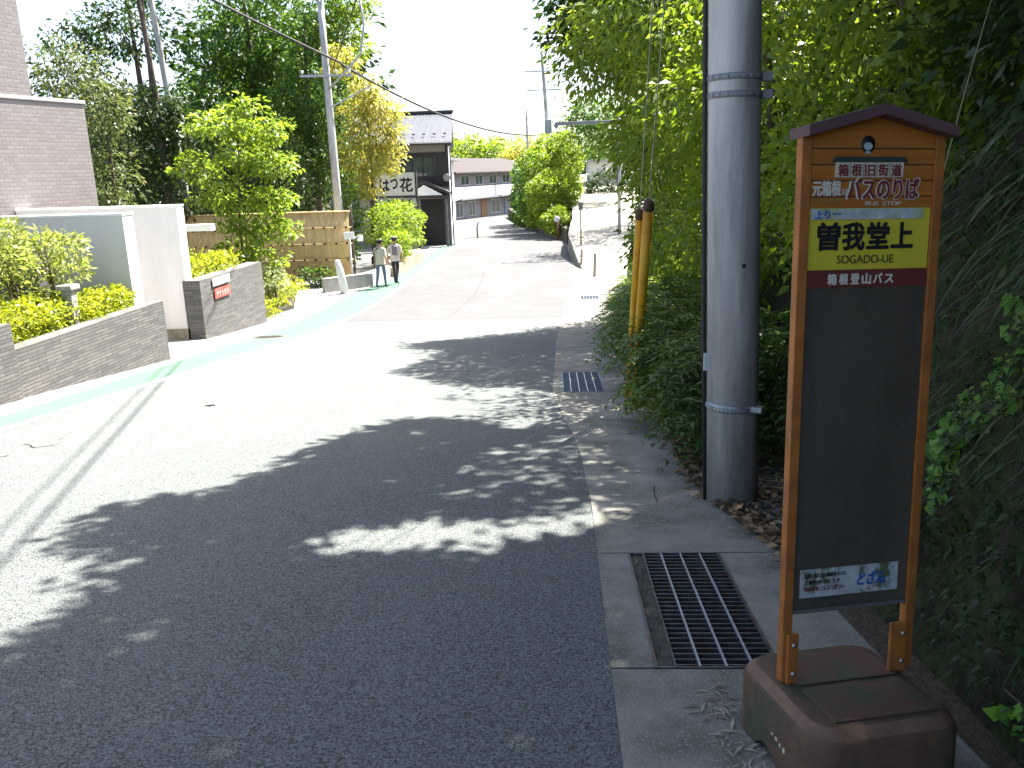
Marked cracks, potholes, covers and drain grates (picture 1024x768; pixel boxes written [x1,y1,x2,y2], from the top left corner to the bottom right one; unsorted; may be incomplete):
drain grate [562,372,605,392]
drain grate [627,552,774,669]
